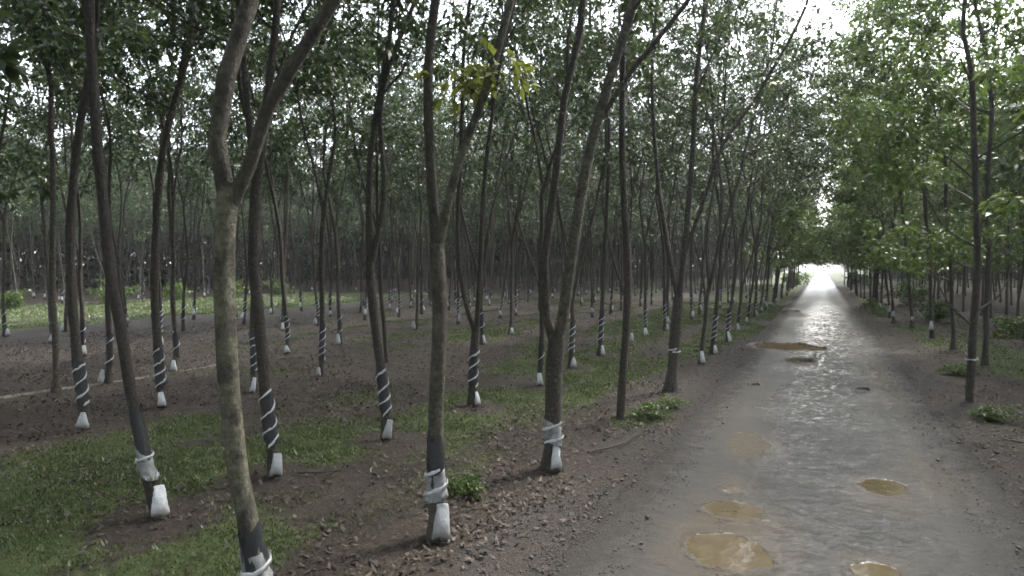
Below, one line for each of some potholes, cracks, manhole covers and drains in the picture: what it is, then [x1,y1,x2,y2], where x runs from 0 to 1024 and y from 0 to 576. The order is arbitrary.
pothole [838,556,910,576]
pothole [676,528,786,576]
pothole [692,497,773,525]
pothole [779,357,819,365]
pothole [713,483,749,497]
pothole [848,476,917,500]
pothole [746,341,831,352]
pothole [722,431,777,460]
